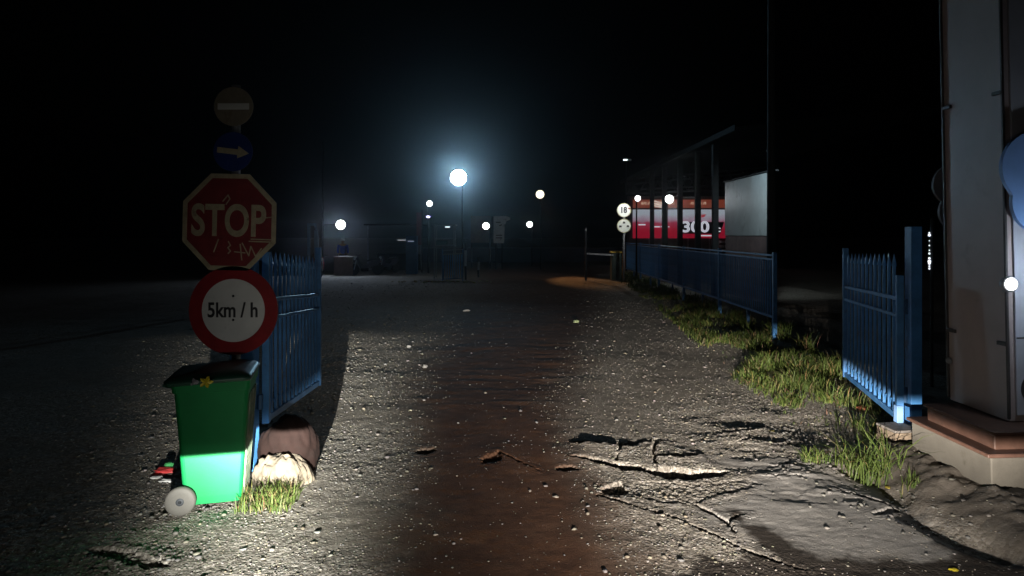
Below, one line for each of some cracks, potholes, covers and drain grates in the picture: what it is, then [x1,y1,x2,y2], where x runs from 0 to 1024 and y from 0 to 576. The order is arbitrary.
crack [489,427,911,575]
